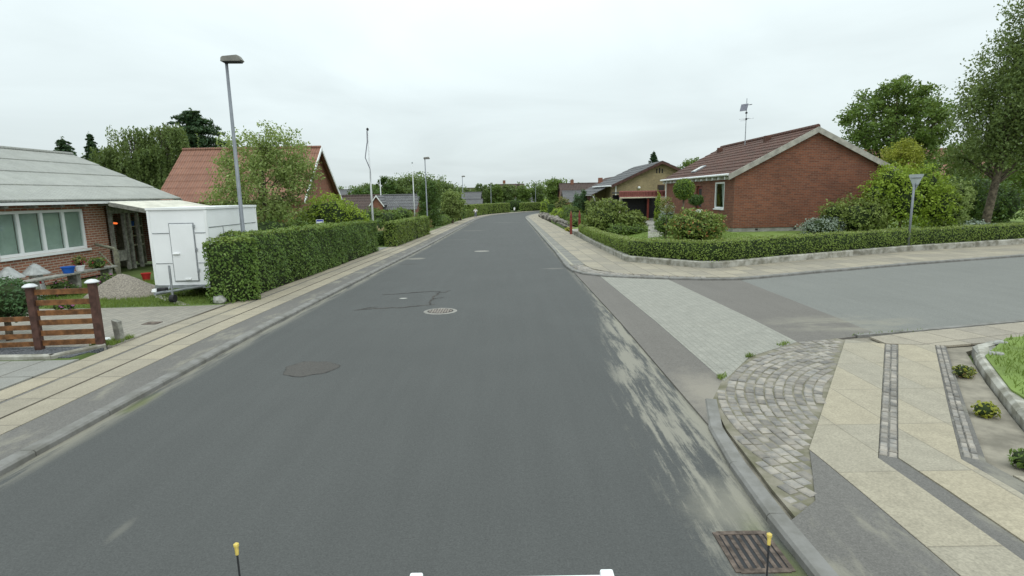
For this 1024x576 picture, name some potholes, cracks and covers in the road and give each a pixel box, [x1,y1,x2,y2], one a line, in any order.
drain grate [712,530,796,574]
